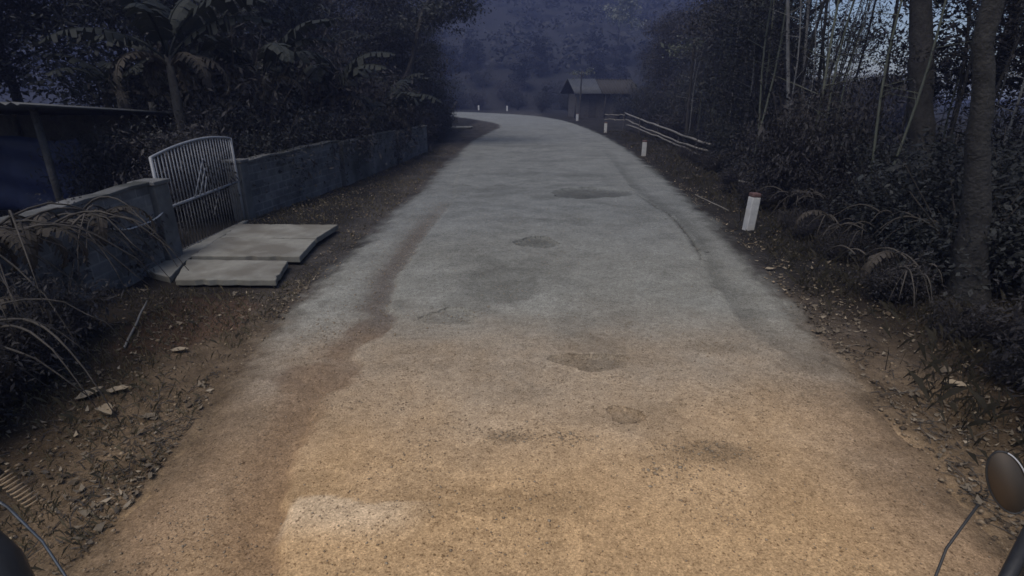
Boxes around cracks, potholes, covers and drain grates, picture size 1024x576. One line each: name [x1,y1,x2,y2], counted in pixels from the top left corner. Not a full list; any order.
pothole [522,350,650,379]
pothole [539,185,653,202]
pothole [594,399,660,431]
pothole [498,232,574,253]
